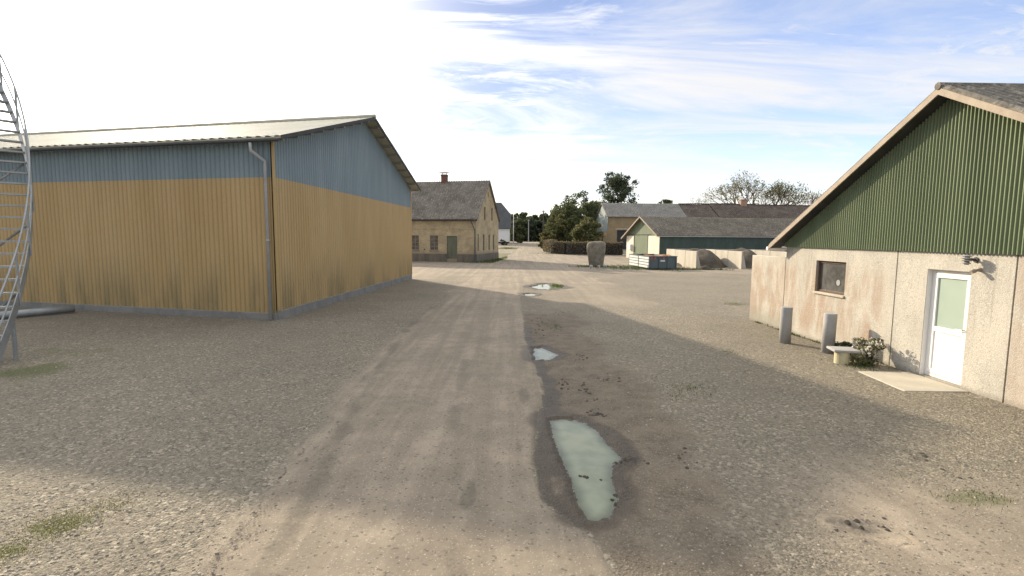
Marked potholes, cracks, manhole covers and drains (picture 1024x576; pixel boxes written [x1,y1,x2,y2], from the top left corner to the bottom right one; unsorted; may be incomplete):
pothole [526,344,573,364]
pothole [532,410,651,540]
pothole [524,283,569,291]
